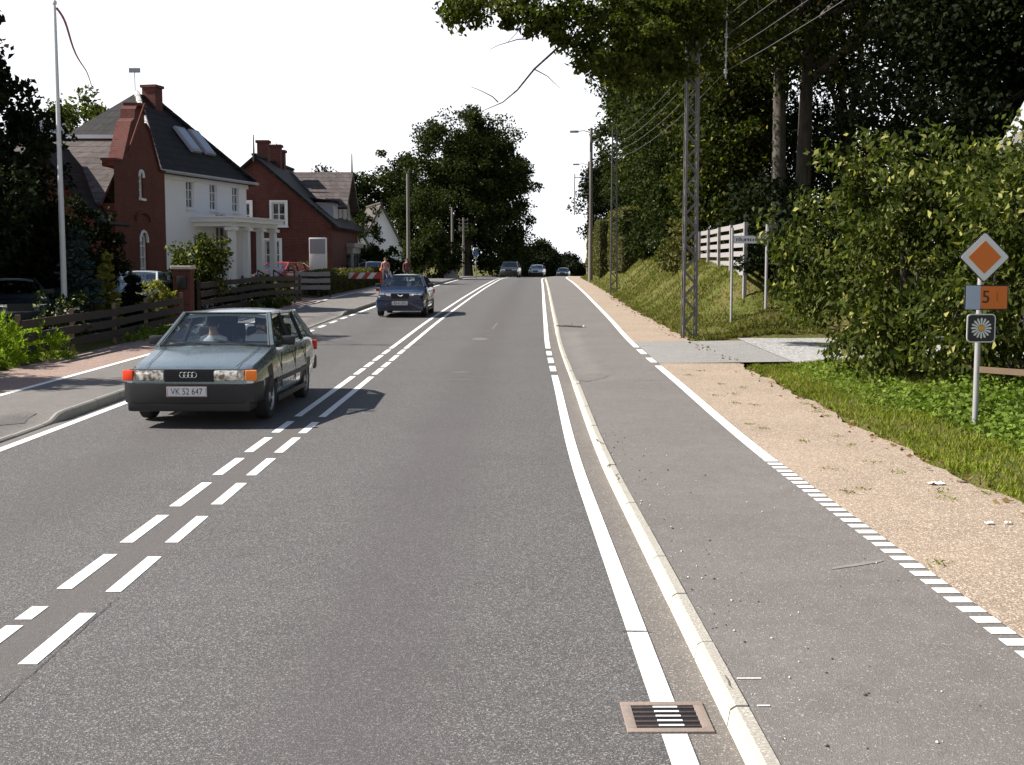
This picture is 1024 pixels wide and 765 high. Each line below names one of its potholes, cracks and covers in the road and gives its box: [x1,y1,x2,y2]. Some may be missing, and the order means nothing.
drain grate [620,701,715,734]
